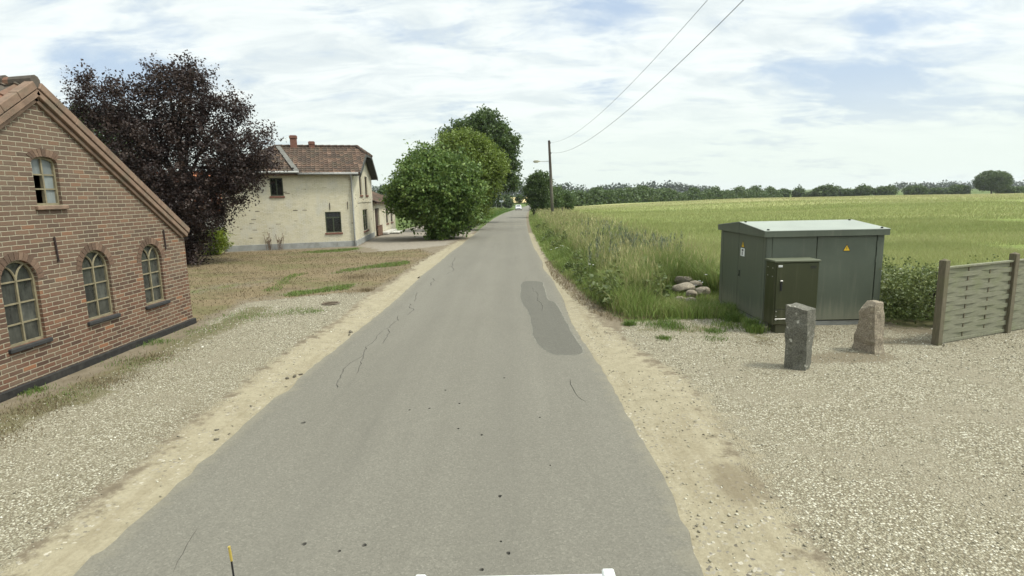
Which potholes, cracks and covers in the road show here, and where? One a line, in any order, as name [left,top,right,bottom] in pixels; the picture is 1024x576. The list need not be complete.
crack [336,251,467,388]
